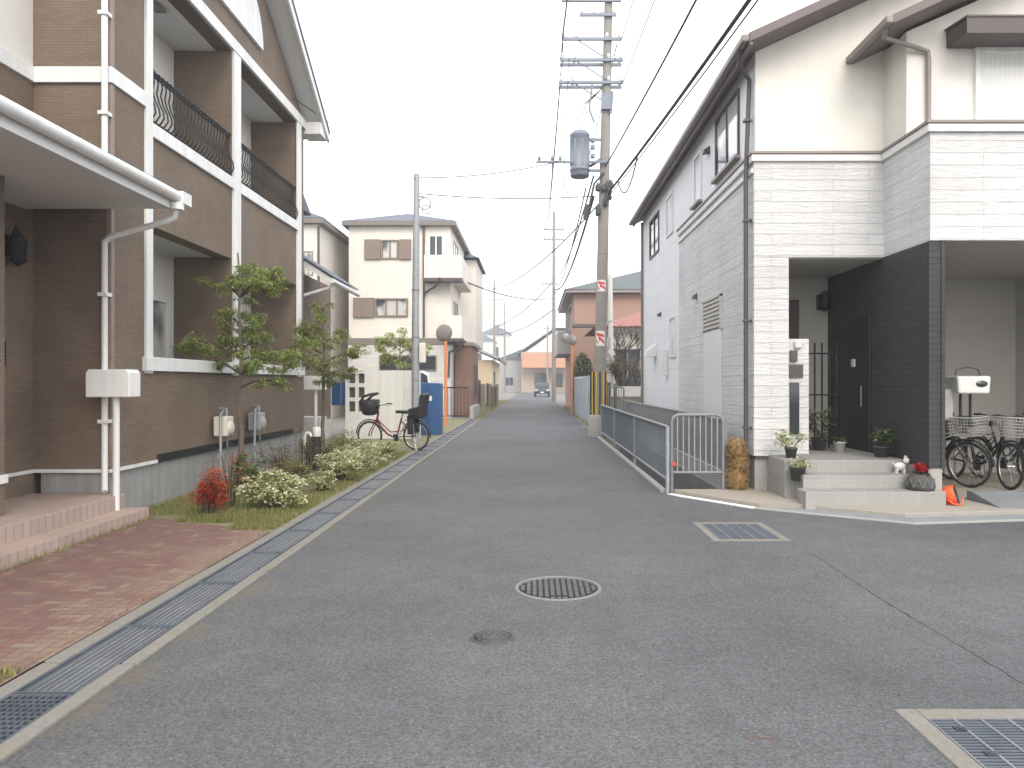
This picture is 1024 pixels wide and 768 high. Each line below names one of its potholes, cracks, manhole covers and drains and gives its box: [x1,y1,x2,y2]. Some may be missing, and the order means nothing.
manhole cover [470,629,515,645]
drain grate [894,709,1024,768]
drain grate [693,522,791,541]
